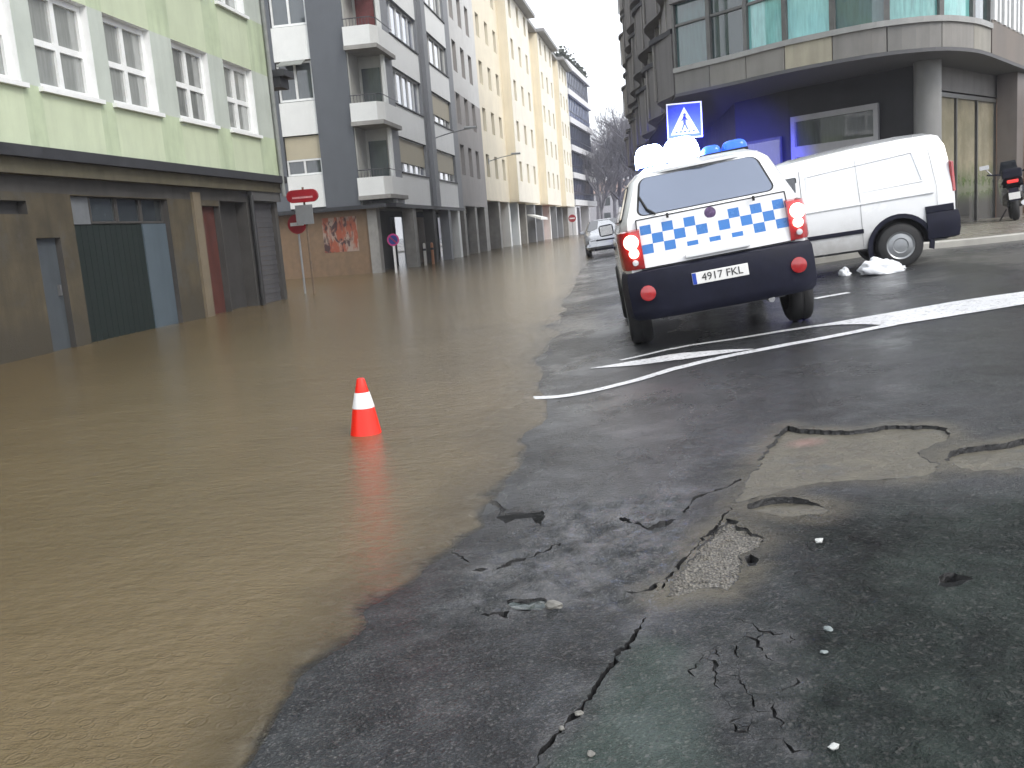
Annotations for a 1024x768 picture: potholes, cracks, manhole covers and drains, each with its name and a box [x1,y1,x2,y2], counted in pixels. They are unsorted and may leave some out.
crack [685,618,806,753]
crack [619,479,740,530]
pothole [938,573,974,587]
pothole [667,518,764,597]
crack [450,544,560,572]
